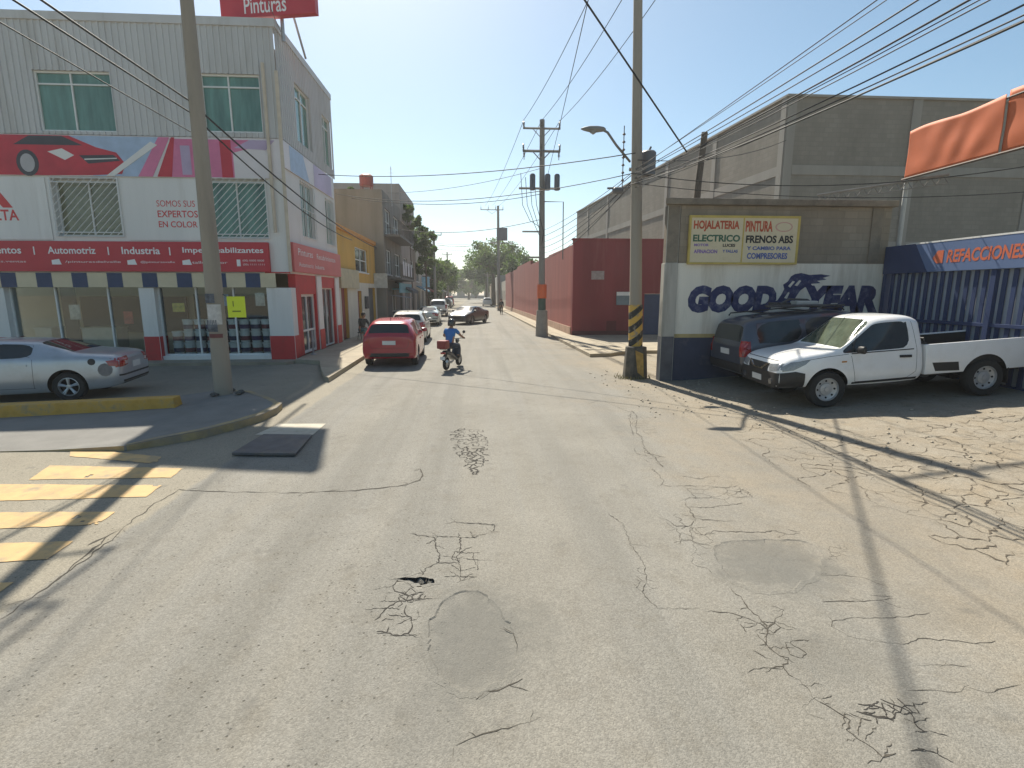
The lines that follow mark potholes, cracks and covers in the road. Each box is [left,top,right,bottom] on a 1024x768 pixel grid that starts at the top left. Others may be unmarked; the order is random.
crack [366,520,498,636]
crack [450,428,489,474]
crack [1,469,423,619]
manhole cover [232,434,312,456]
crack [453,713,540,750]
pothole [389,574,440,588]
crack [605,401,1020,764]
